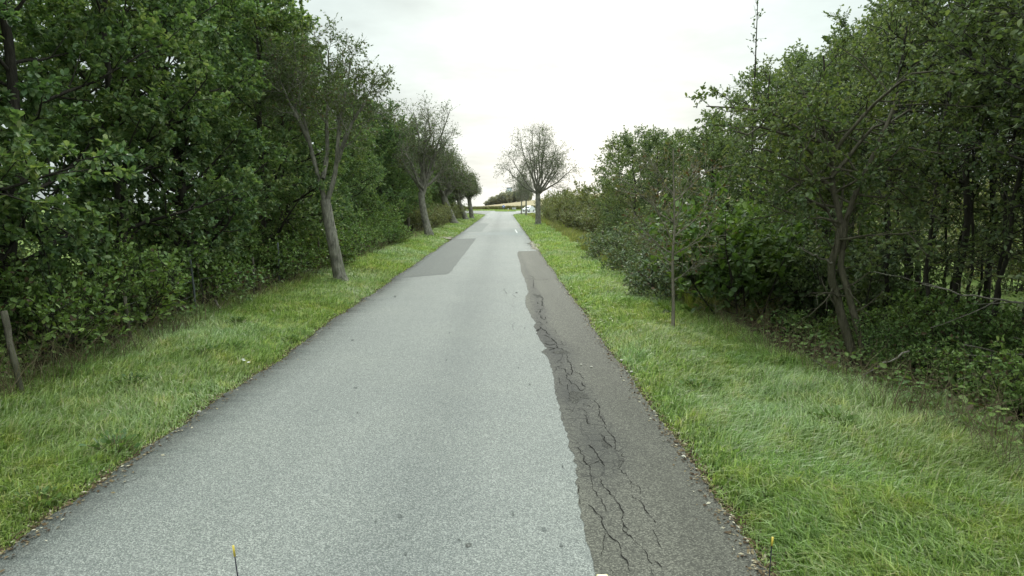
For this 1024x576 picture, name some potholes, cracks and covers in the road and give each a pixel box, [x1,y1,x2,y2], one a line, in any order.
crack [503,277,662,575]
